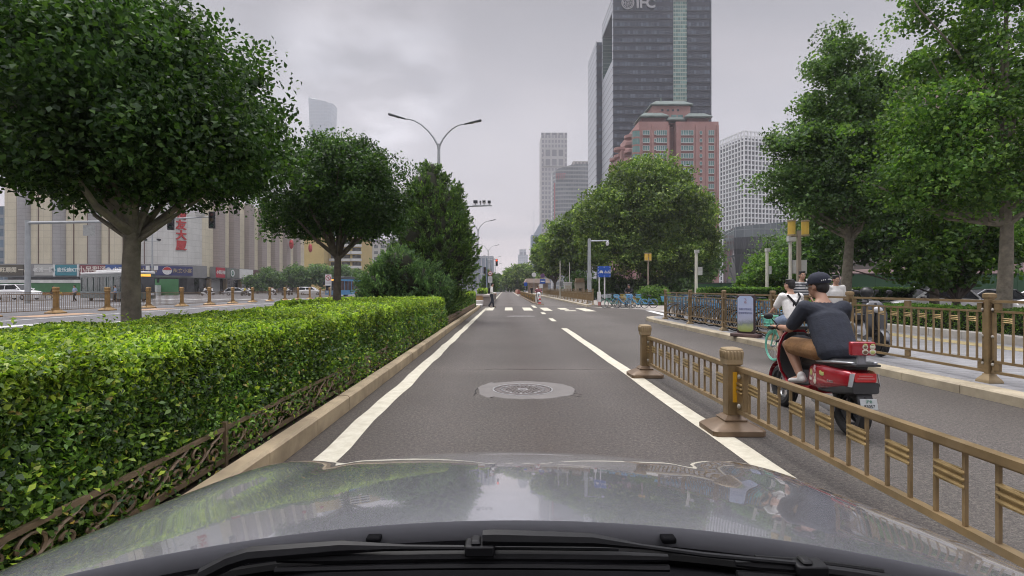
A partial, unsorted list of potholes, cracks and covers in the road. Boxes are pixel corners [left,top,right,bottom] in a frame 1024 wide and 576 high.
manhole cover [478,381,575,399]
